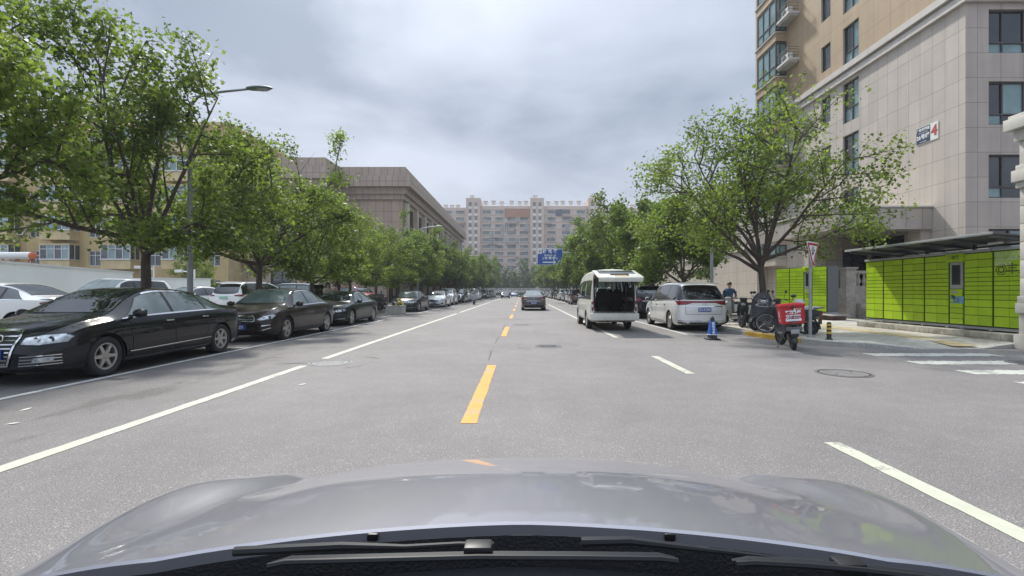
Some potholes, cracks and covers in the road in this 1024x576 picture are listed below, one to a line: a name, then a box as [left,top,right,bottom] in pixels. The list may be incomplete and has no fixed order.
manhole cover [814,369,875,378]
